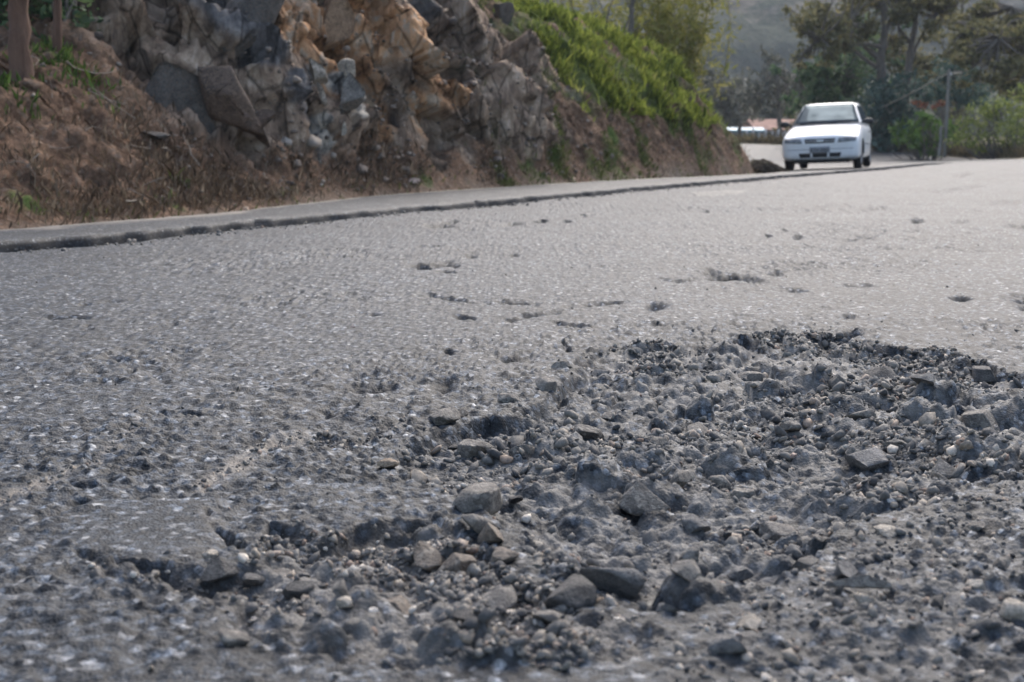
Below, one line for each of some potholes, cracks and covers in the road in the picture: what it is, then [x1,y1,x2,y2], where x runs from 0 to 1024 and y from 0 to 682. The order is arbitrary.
pothole [691,266,779,285]
pothole [290,402,360,423]
pothole [106,452,160,477]
pothole [390,331,1024,615]
pothole [321,376,416,396]
